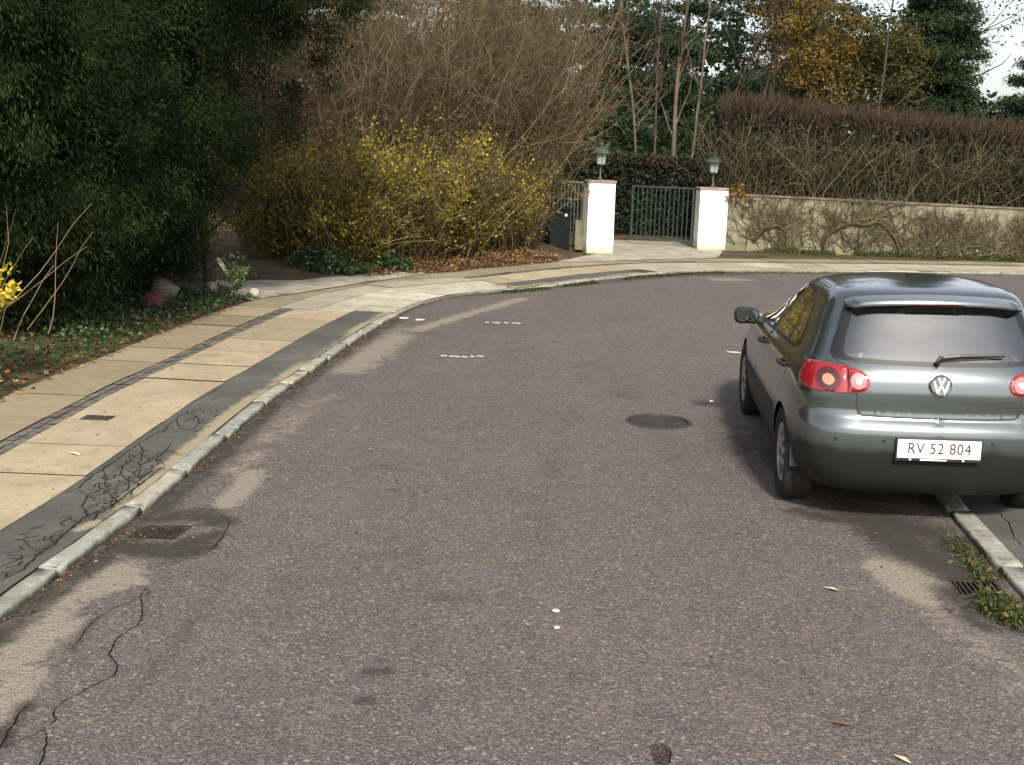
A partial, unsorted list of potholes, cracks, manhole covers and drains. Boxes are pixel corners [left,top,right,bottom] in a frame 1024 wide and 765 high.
crack [0,389,231,765]
manhole cover [625,414,693,430]
drain grate [947,578,1009,598]
